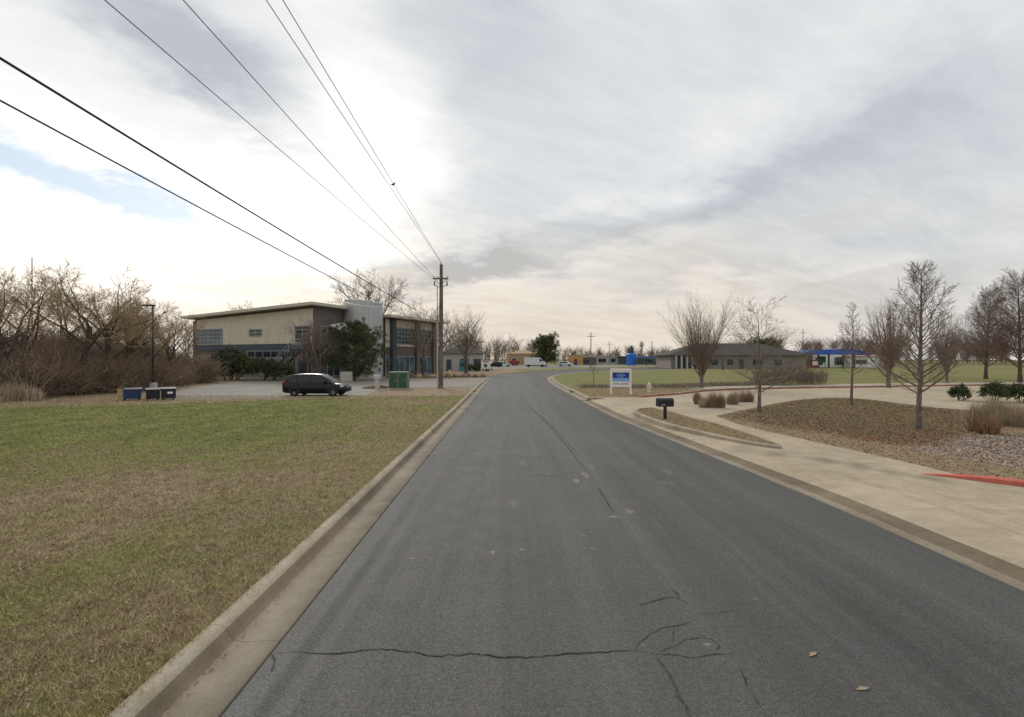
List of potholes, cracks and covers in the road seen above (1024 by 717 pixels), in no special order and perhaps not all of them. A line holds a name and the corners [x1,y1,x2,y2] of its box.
crack [271,621,723,717]
